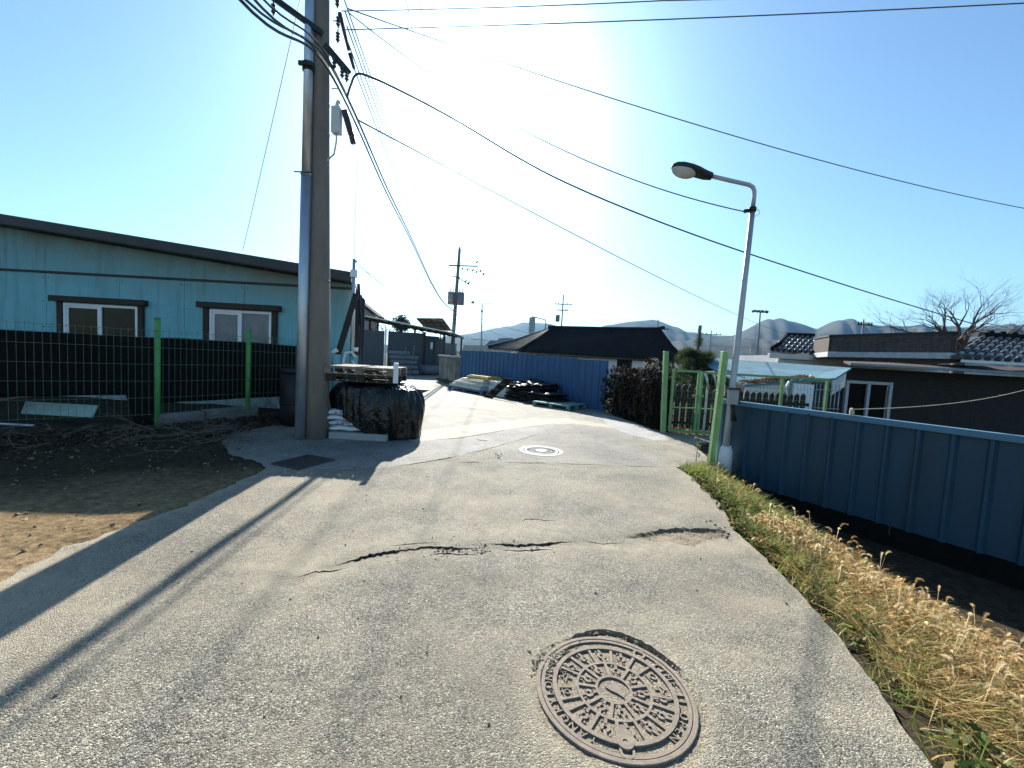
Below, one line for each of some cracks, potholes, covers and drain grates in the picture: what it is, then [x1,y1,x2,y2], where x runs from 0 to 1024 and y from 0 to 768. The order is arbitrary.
crack [300,541,616,577]
manhole cover [529,629,710,768]
manhole cover [519,446,564,456]
